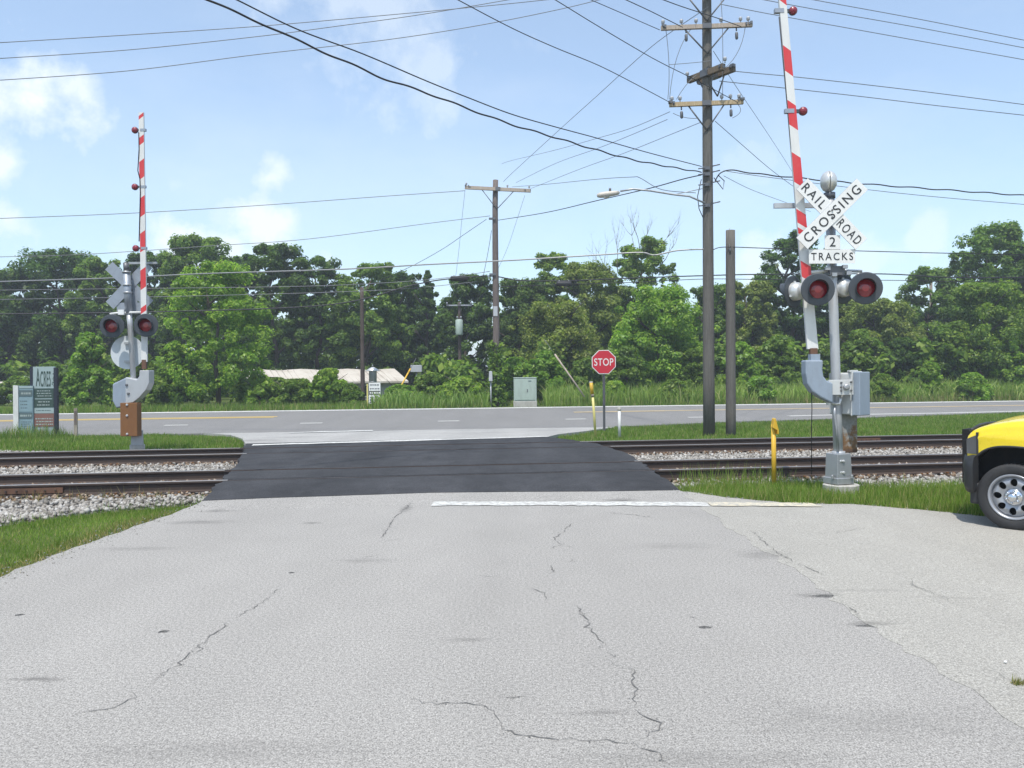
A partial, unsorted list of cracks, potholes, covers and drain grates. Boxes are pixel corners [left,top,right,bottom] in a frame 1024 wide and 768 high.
crack [74,589,277,715]
crack [423,608,672,761]
